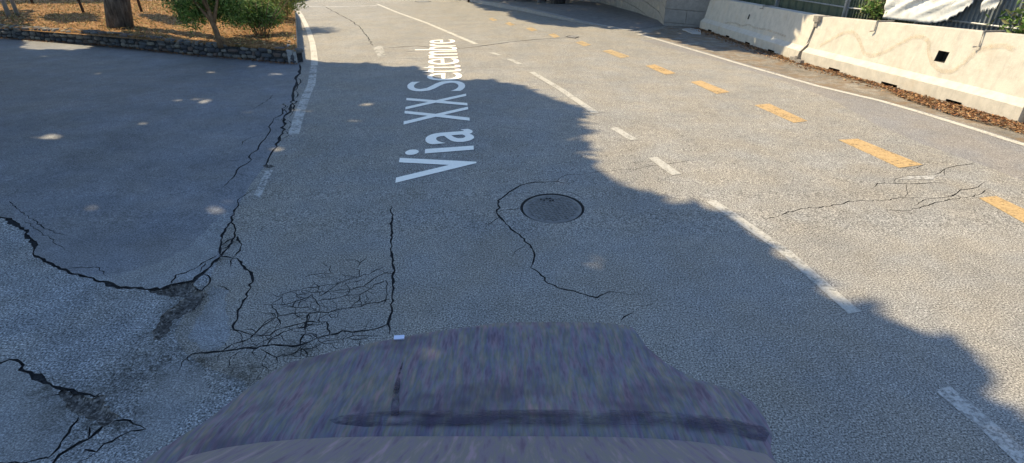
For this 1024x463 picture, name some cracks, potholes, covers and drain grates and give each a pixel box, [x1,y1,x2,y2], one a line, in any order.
crack [767,163,990,219]
crack [0,64,395,378]
crack [0,359,146,463]
crack [489,159,699,320]
manhole cover [520,193,584,223]
